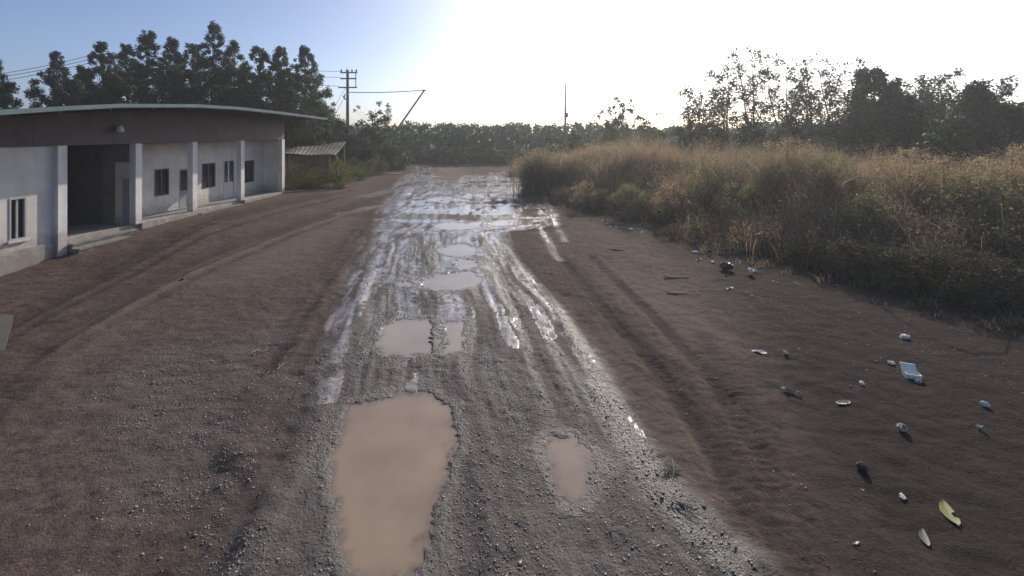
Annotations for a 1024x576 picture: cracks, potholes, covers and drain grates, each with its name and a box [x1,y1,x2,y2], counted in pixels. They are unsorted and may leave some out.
pothole [308,385,474,576]
pothole [527,426,617,519]
pothole [435,242,484,258]
pothole [365,315,451,359]
pothole [411,268,488,293]
